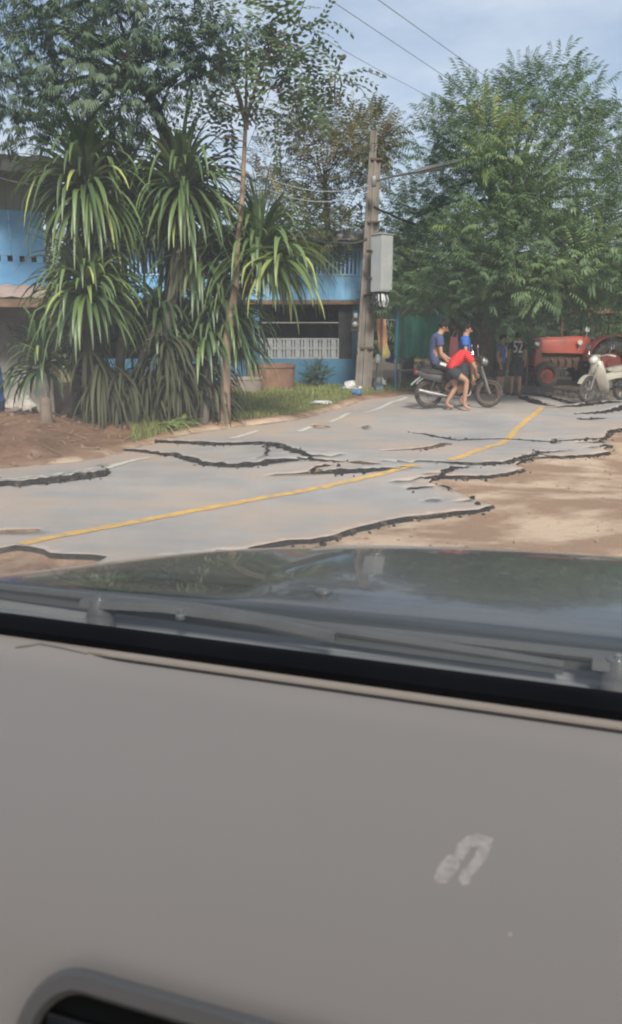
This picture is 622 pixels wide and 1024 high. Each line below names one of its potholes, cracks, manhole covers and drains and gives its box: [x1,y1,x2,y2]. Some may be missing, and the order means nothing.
crack [251,395,622,549]
crack [0,440,389,487]
